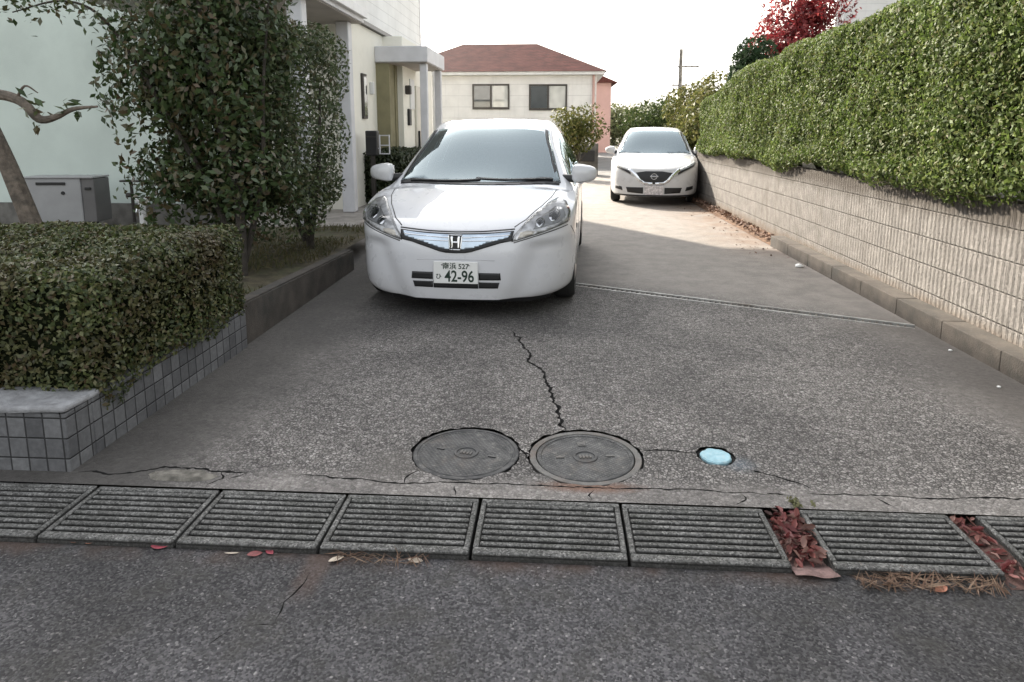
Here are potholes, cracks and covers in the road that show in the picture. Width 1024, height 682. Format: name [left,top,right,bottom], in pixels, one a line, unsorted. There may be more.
crack [83,466,246,489]
utility cover [696,448,736,466]
manhole cover [411,429,521,481]
crack [513,332,566,459]
crack [746,469,815,491]
crack [249,573,310,626]
manhole cover [528,432,644,503]
